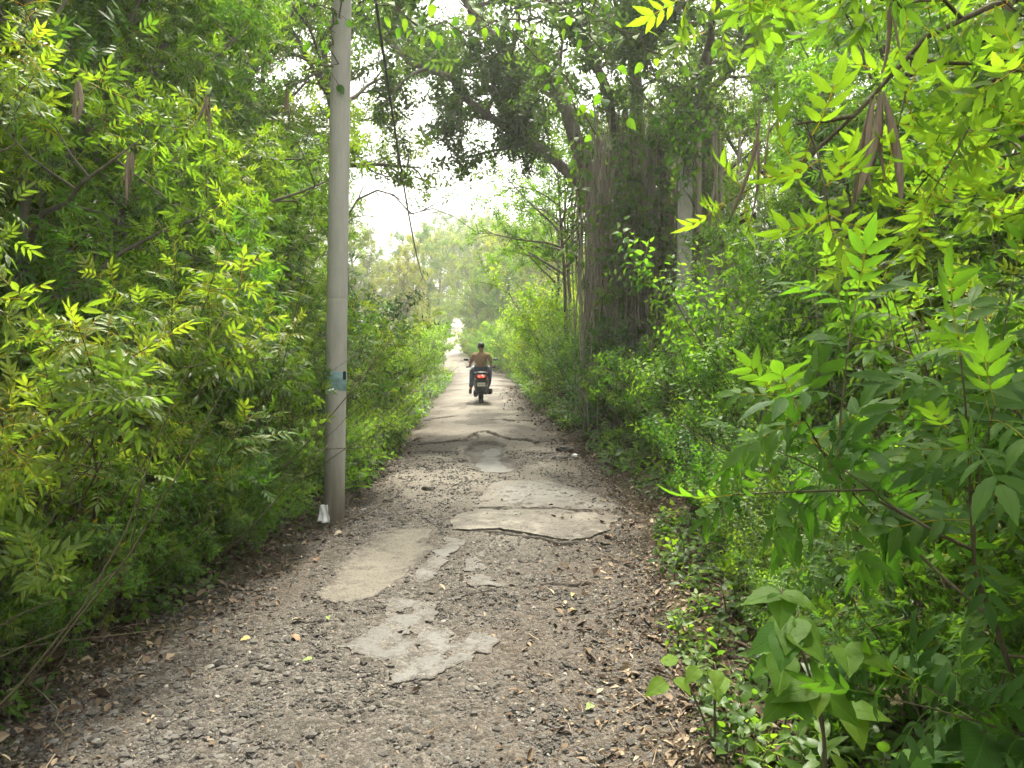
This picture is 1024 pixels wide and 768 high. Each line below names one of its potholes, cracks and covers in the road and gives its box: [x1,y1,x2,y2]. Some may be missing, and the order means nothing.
pothole [458,441,522,473]
crack [417,415,557,454]
